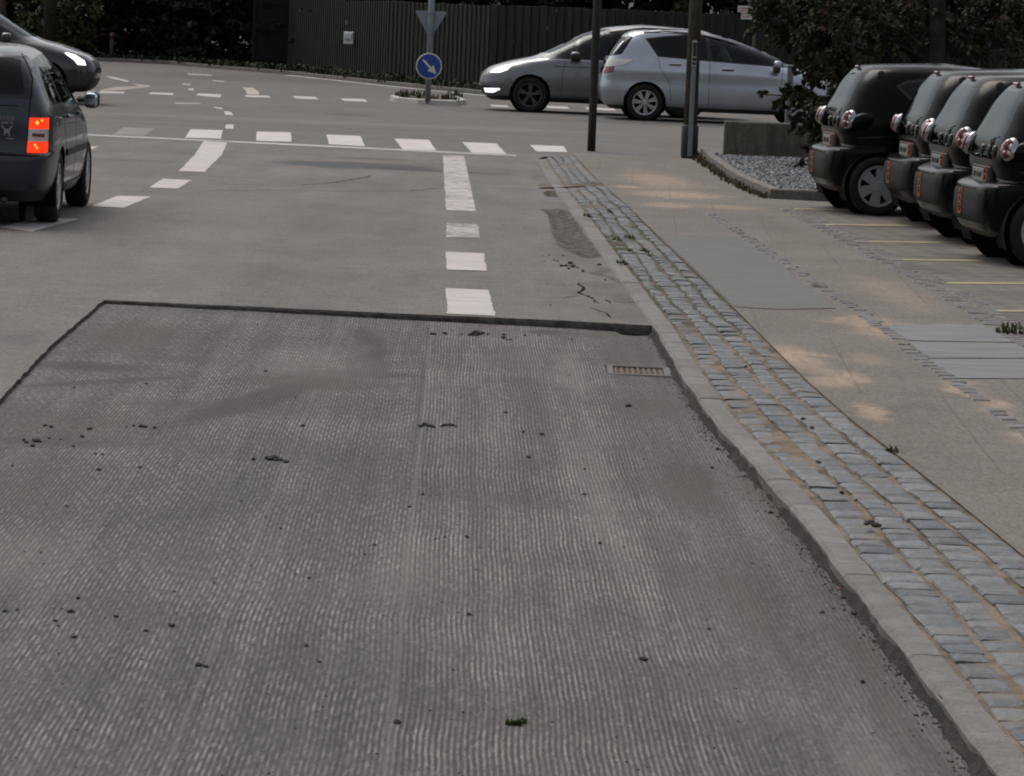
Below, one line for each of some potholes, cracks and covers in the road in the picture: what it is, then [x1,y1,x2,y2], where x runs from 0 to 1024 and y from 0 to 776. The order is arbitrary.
drain grate [605,365,672,378]
crack [560,266,628,318]
crack [208,176,437,191]
